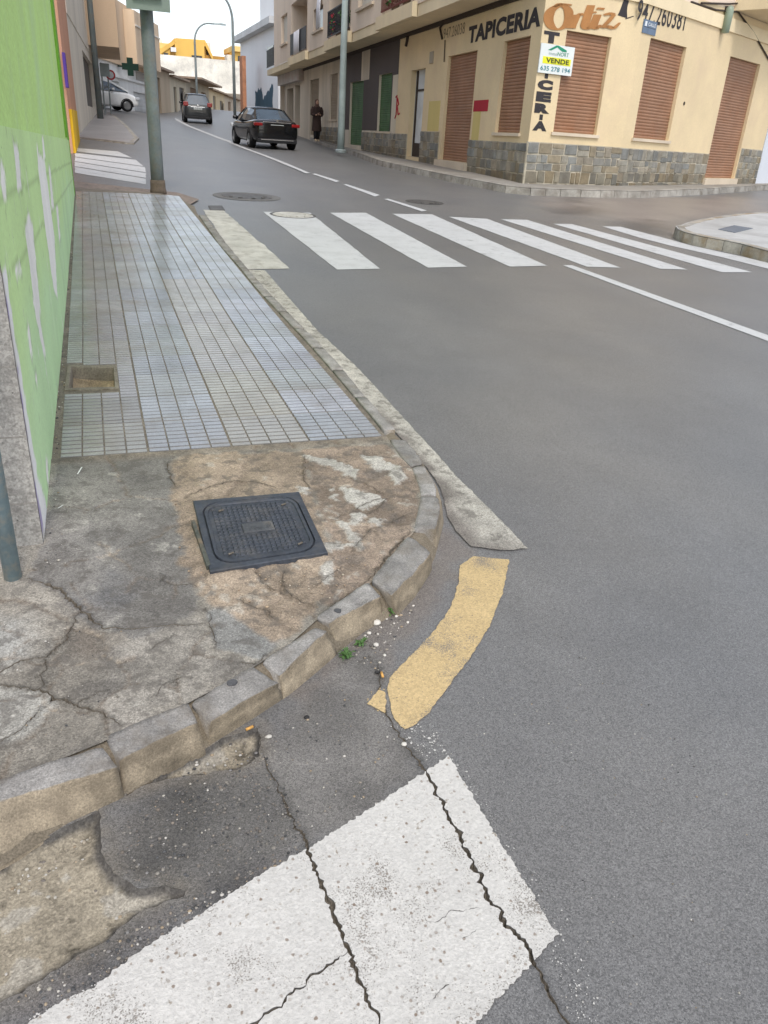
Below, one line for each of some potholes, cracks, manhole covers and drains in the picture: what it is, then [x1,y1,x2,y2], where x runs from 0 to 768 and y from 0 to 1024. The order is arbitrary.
crack [377,666,570,1024]
pothole [126,728,260,796]
manhole cover [193,492,328,574]
manhole cover [213,192,281,201]
manhole cover [718,225,753,233]
crack [254,736,380,1024]
